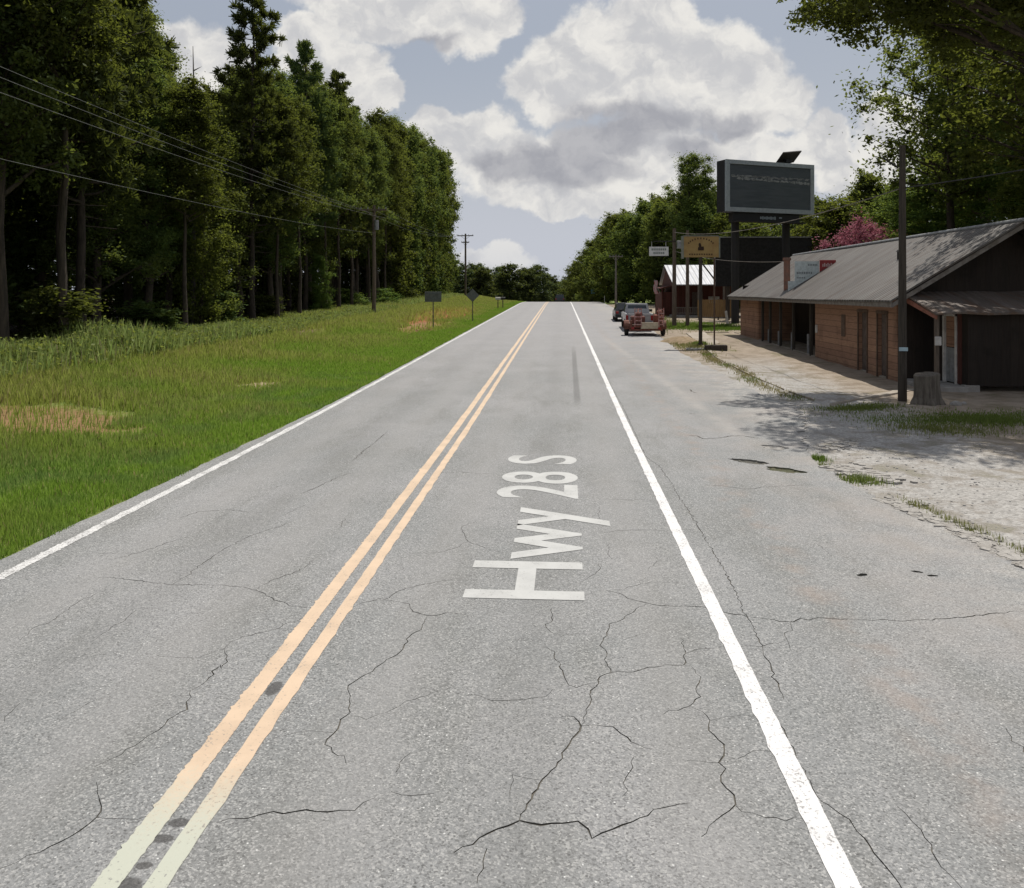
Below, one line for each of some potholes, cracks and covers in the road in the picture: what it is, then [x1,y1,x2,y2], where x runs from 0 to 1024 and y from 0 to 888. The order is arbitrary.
crack [20,525,314,640]
crack [94,619,300,767]
crack [454,367,1021,882]
crack [221,798,373,822]
crack [0,782,146,869]
crack [271,577,468,762]
